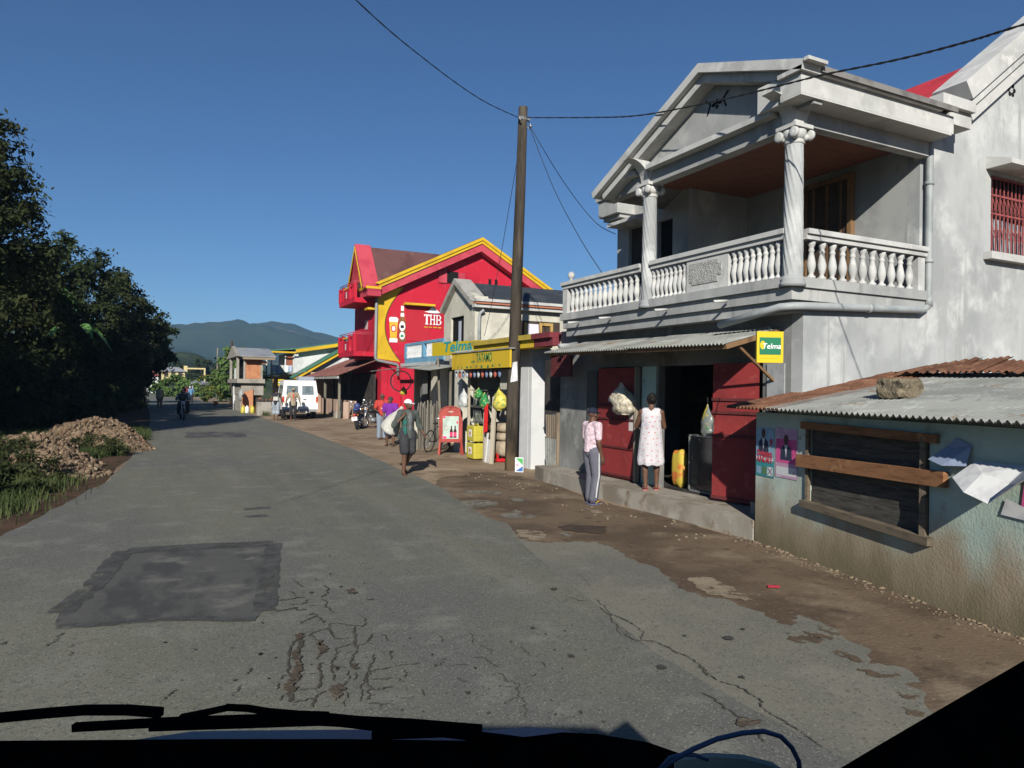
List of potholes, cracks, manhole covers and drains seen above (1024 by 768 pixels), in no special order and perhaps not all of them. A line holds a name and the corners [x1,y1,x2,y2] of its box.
crack [572,576,822,746]
crack [274,580,546,717]
